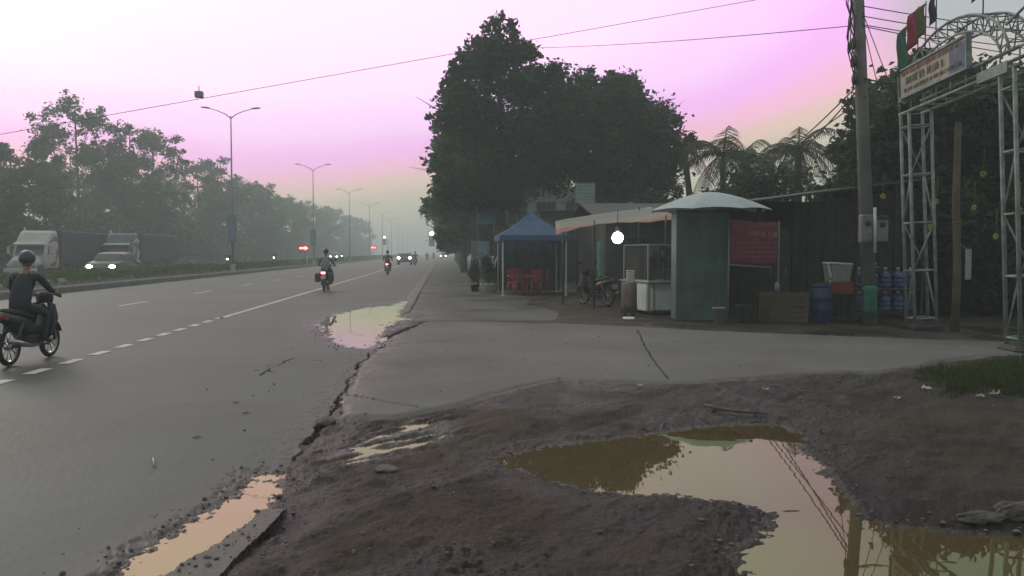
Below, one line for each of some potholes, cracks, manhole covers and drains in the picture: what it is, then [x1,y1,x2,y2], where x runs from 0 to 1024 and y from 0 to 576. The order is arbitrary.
pothole [107,471,287,576]
crack [292,323,420,461]
pothole [314,300,413,349]
pothole [489,422,1024,576]
pothole [326,417,449,465]
